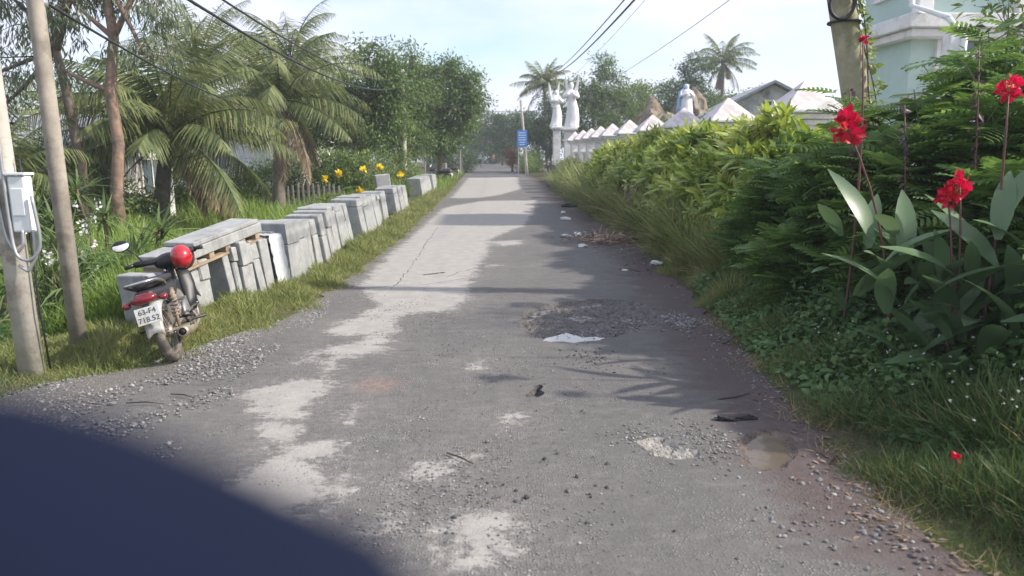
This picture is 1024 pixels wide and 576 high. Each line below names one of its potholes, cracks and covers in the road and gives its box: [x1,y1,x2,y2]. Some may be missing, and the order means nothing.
pothole [636,437,701,460]
pothole [739,429,798,471]
crack [365,228,480,288]
pothole [518,299,661,343]
